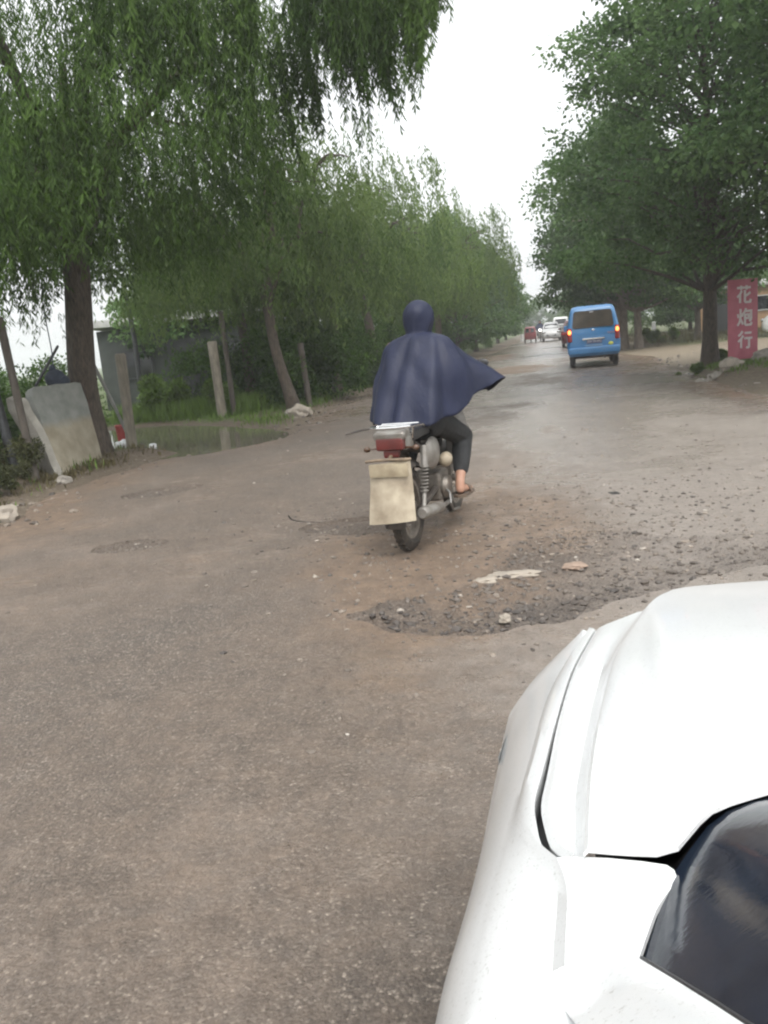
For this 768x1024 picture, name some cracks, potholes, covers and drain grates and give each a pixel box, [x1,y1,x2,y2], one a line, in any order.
pothole [120,483,203,499]
pothole [91,539,169,554]
pothole [345,529,768,636]
